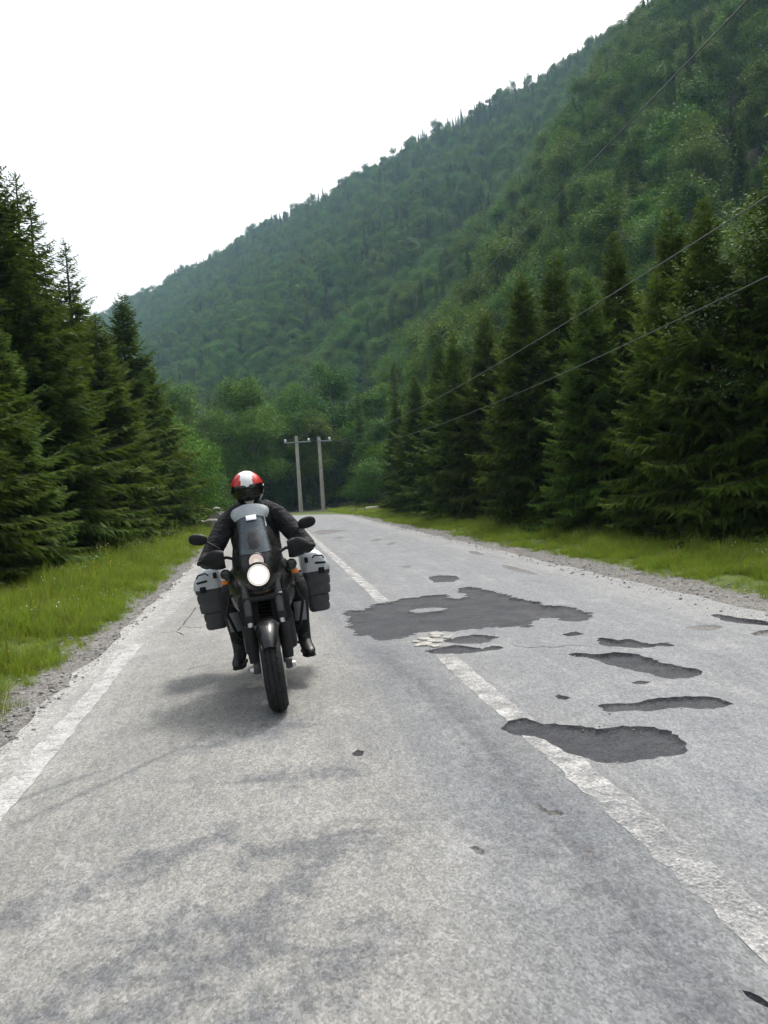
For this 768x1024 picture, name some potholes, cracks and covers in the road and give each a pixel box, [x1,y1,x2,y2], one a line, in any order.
pothole [342,587,595,641]
pothole [501,718,688,763]
pothole [569,652,703,679]
pothole [711,614,768,626]
pothole [597,638,674,648]
pothole [424,645,503,654]
pothole [742,990,768,1008]
pothole [598,696,733,712]
pothole [443,635,499,644]
